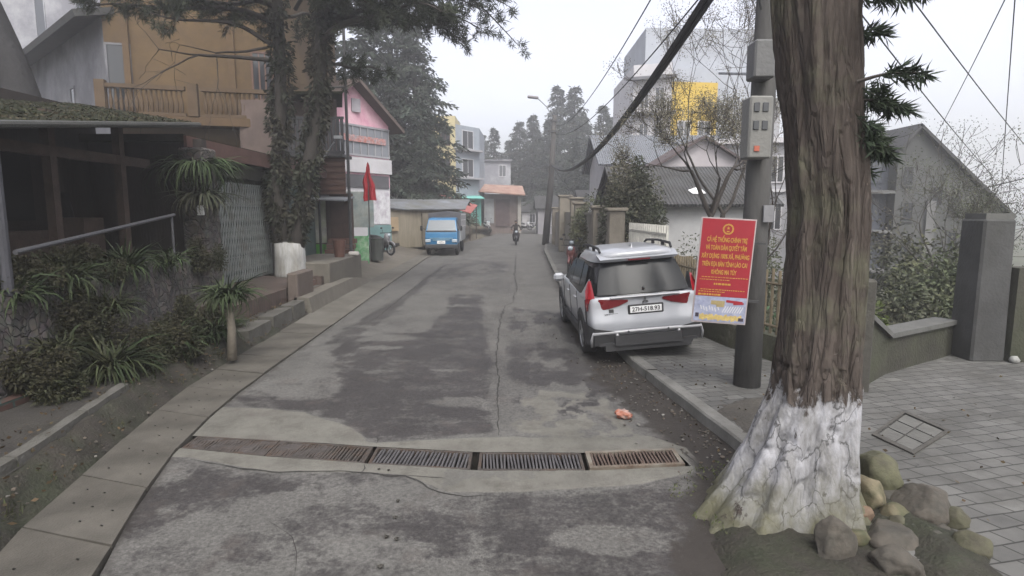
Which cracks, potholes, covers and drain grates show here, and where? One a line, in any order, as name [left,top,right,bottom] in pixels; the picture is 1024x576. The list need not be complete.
drain grate [478,452,585,471]
drain grate [585,448,685,470]
drain grate [368,447,473,470]
manhole cover [872,410,951,455]
crack [495,254,518,435]
drain grate [265,441,373,463]
